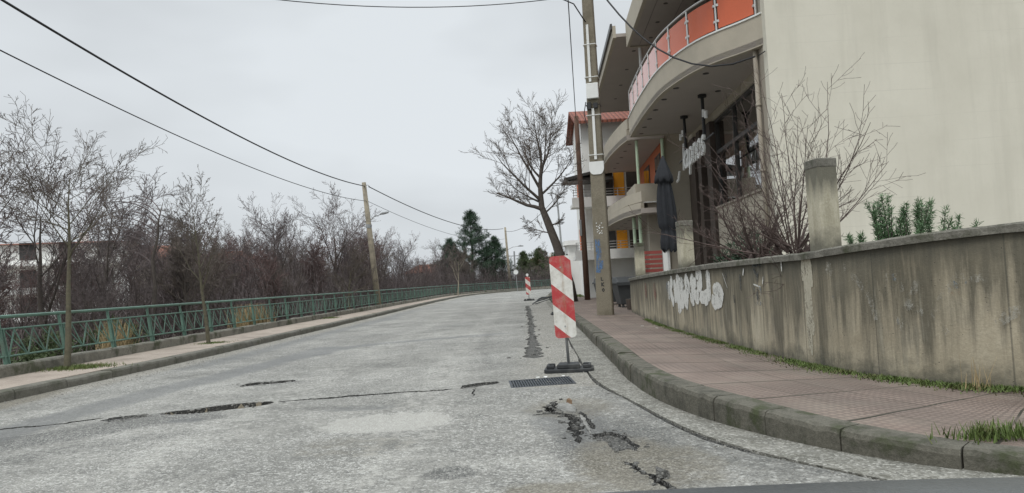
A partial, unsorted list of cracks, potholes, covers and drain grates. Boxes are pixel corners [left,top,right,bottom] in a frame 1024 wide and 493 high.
pothole [161,401,286,416]
crack [0,418,102,430]
crack [279,389,475,402]
drain grate [509,376,576,388]
crack [532,339,807,489]
pothole [232,380,299,388]
